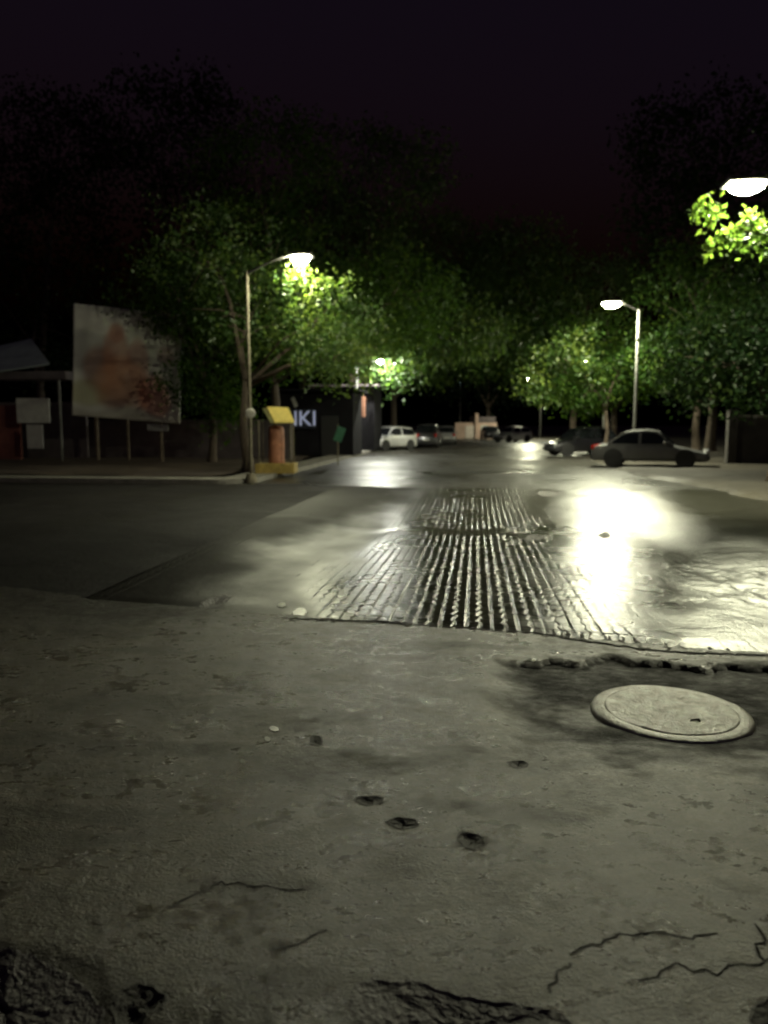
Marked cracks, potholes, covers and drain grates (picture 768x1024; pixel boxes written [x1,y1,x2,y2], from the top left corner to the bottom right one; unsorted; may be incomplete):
manhole cover [590,685,756,744]
pothole [506,760,529,769]
crack [167,880,305,909]
pothole [385,816,420,829]
pothole [353,795,384,806]
pothole [456,832,488,850]
pothole [345,979,574,1024]
pothole [108,983,169,1024]
pothole [0,947,106,1024]
crack [270,929,328,951]
crack [547,923,768,993]
